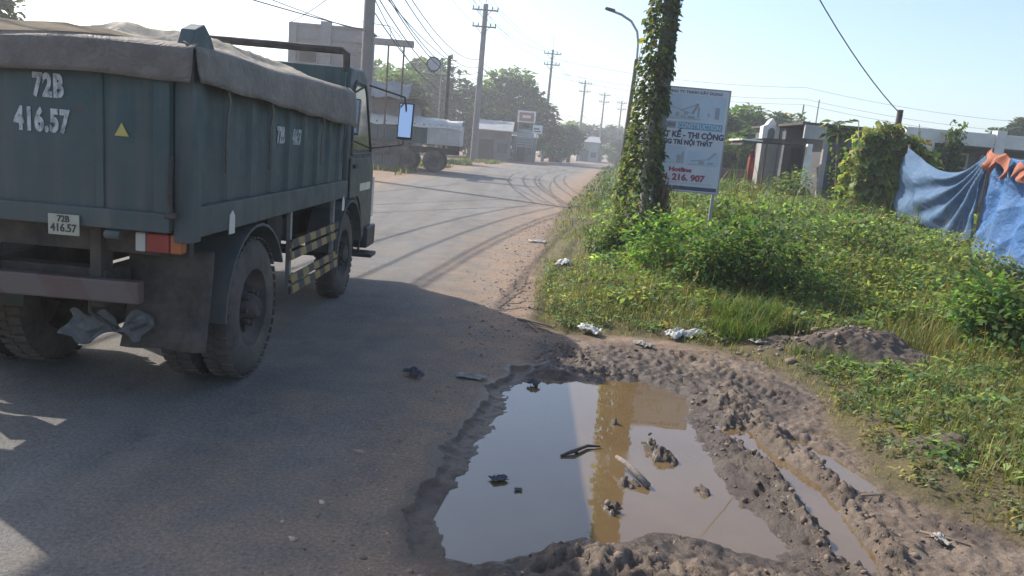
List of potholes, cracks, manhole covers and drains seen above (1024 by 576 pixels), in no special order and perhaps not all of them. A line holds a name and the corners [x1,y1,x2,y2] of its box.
pothole [400,363,841,576]
